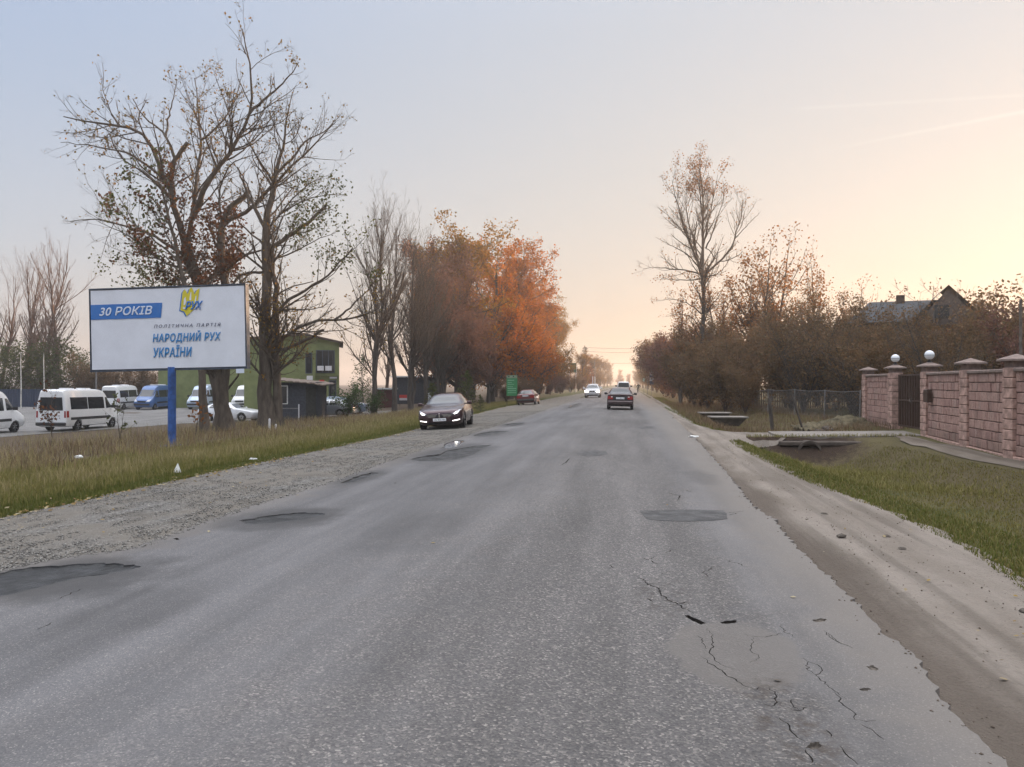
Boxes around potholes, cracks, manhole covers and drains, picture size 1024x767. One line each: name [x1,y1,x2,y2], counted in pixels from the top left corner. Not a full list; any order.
crack [806,662,883,739]
pothole [0,563,141,596]
pothole [412,445,490,461]
pothole [442,440,464,448]
pothole [341,472,378,483]
pothole [239,512,324,524]
crack [698,625,854,763]
crack [638,550,691,612]
